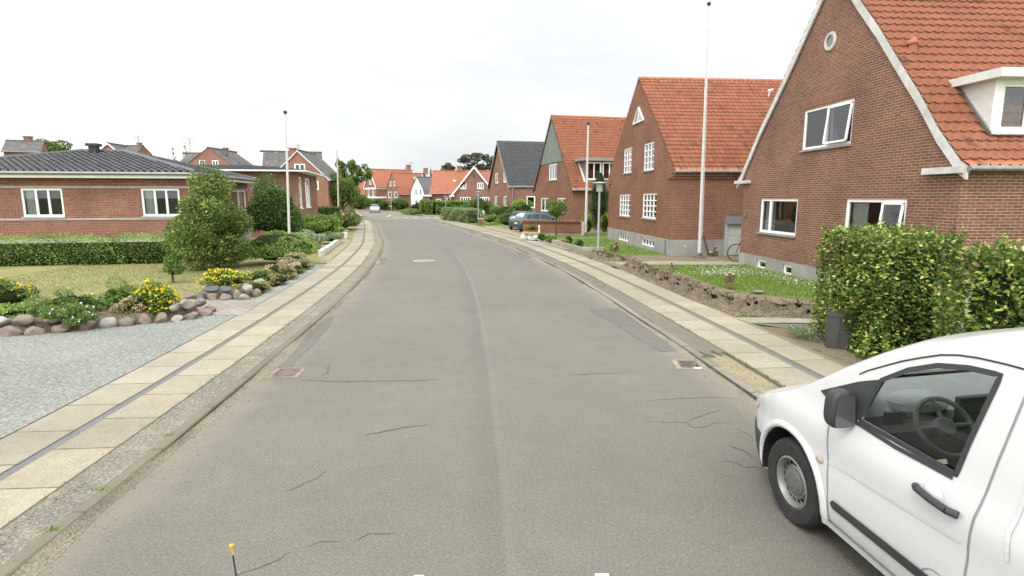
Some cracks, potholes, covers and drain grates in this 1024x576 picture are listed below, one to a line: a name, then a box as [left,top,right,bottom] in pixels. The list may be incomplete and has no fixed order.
crack [314,365,435,382]
crack [651,397,754,467]
crack [237,533,390,575]
